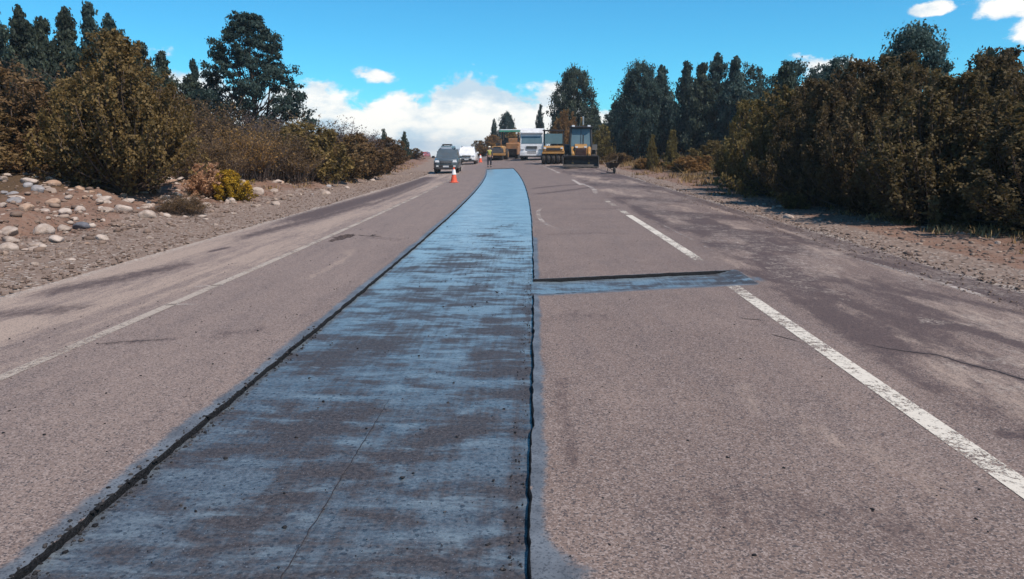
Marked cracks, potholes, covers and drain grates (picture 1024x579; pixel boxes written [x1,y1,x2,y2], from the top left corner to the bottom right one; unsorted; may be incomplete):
crack [873,345,1023,379]
